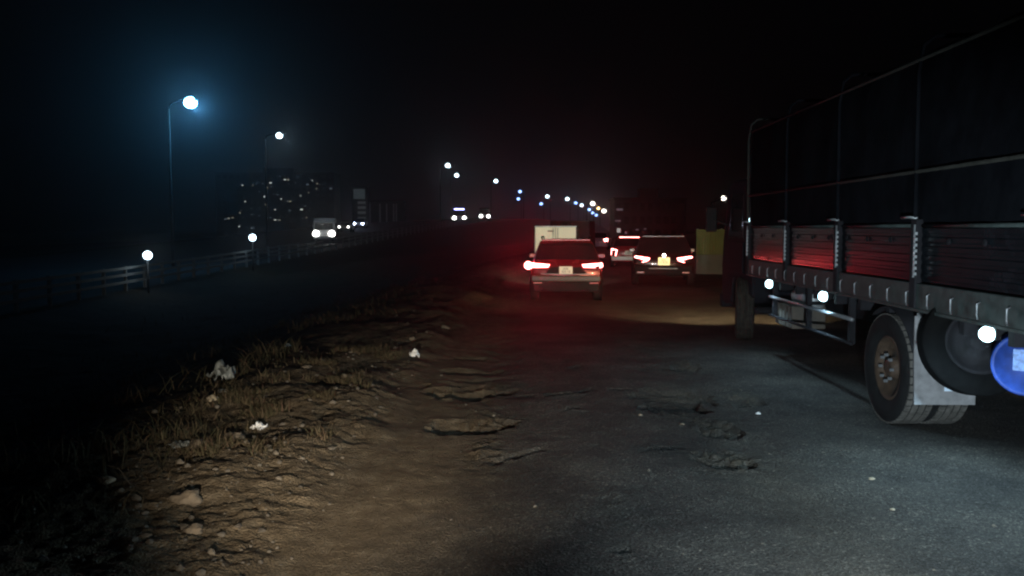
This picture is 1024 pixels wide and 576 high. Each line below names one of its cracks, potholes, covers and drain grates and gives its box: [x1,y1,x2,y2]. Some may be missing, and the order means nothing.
crack [493,445,547,466]
pothole [694,420,747,440]
pothole [424,417,521,436]
pothole [421,383,522,402]
pothole [624,384,722,414]
crack [640,444,690,453]
pothole [690,450,760,471]
